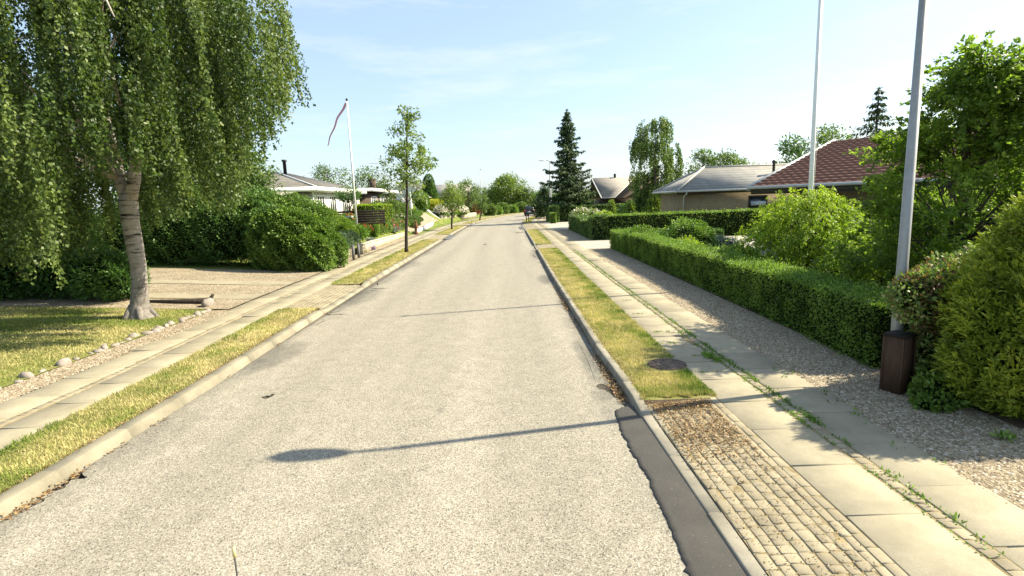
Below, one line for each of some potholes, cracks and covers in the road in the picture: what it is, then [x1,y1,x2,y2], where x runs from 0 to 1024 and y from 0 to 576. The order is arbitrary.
manhole cover [647,358,687,370]
